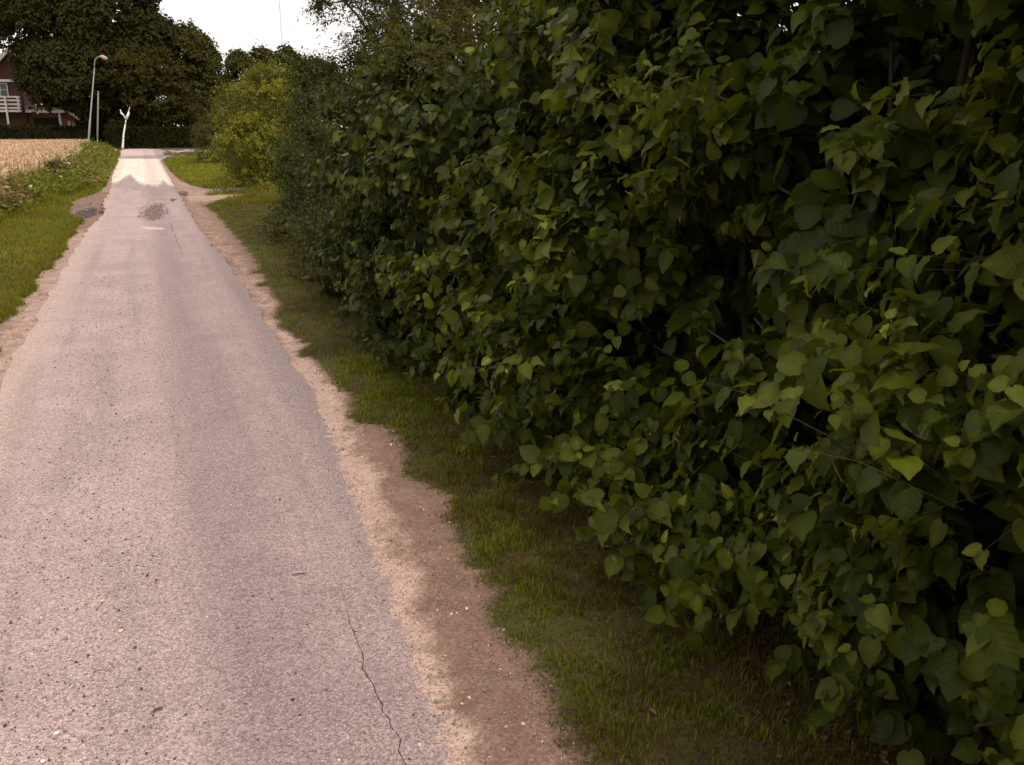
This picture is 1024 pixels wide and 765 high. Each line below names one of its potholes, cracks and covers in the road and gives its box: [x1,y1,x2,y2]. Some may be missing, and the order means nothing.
pothole [137,199,175,223]
pothole [68,202,103,219]
